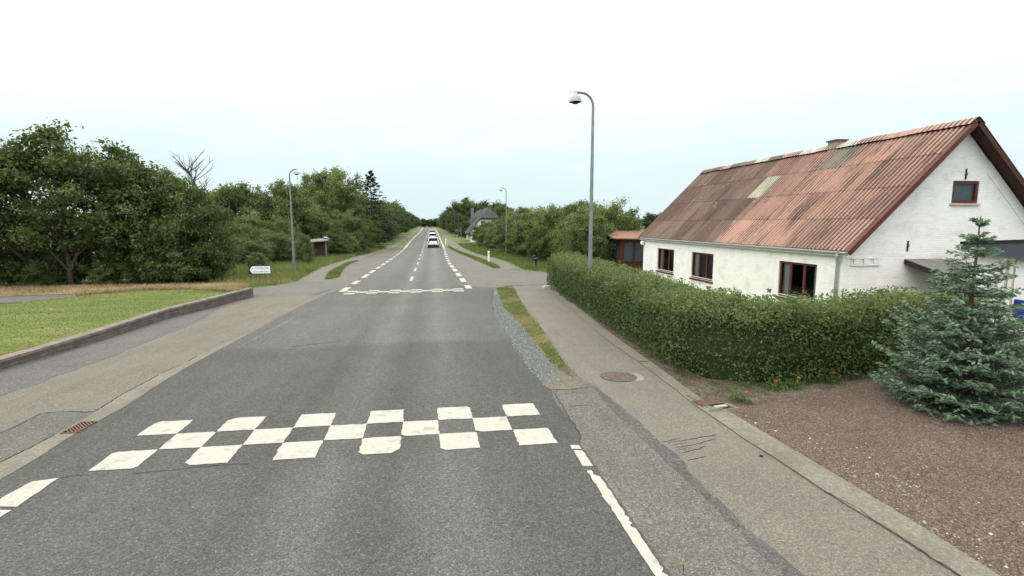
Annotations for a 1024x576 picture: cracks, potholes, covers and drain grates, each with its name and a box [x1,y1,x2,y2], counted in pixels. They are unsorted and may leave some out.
drain grate [60,421,97,434]
manhole cover [600,372,644,382]
